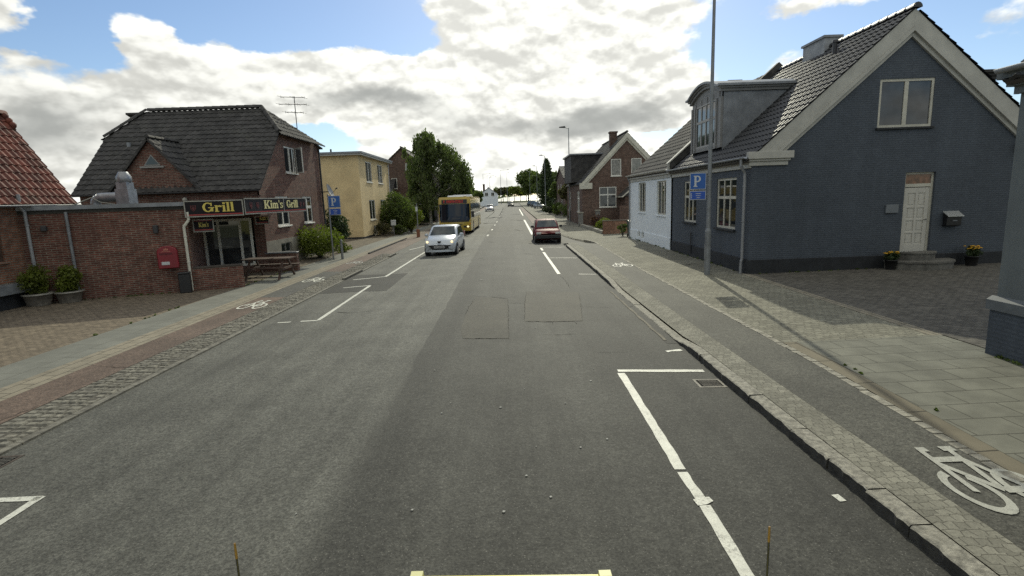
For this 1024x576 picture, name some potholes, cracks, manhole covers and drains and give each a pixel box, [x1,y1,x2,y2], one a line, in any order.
drain grate [0,455,25,468]
drain grate [692,379,727,388]
